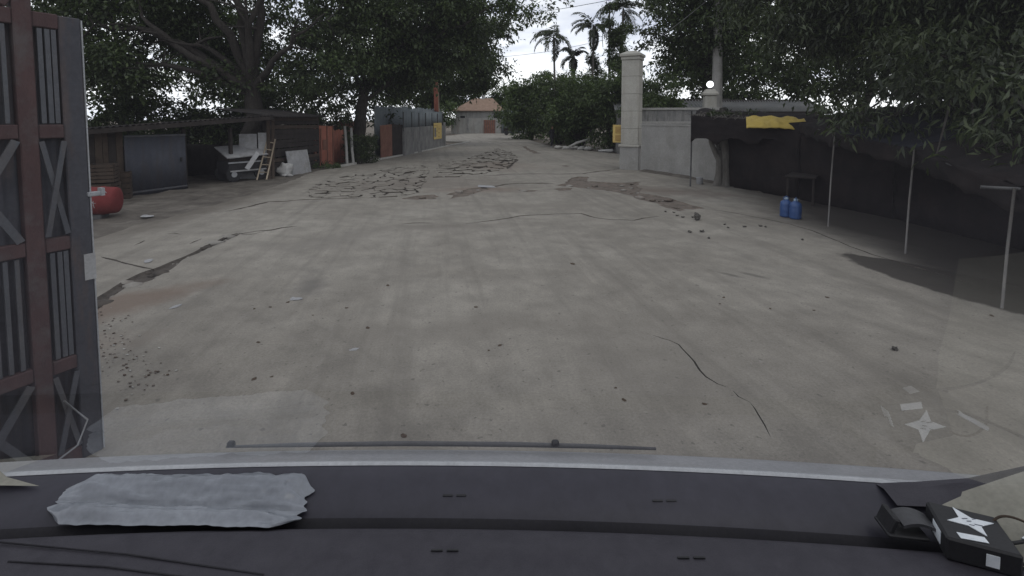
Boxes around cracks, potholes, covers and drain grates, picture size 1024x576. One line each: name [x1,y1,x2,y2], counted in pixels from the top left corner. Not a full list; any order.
crack [221,226,294,241]
pothole [558,177,703,210]
crack [466,213,659,224]
crack [653,335,770,435]
